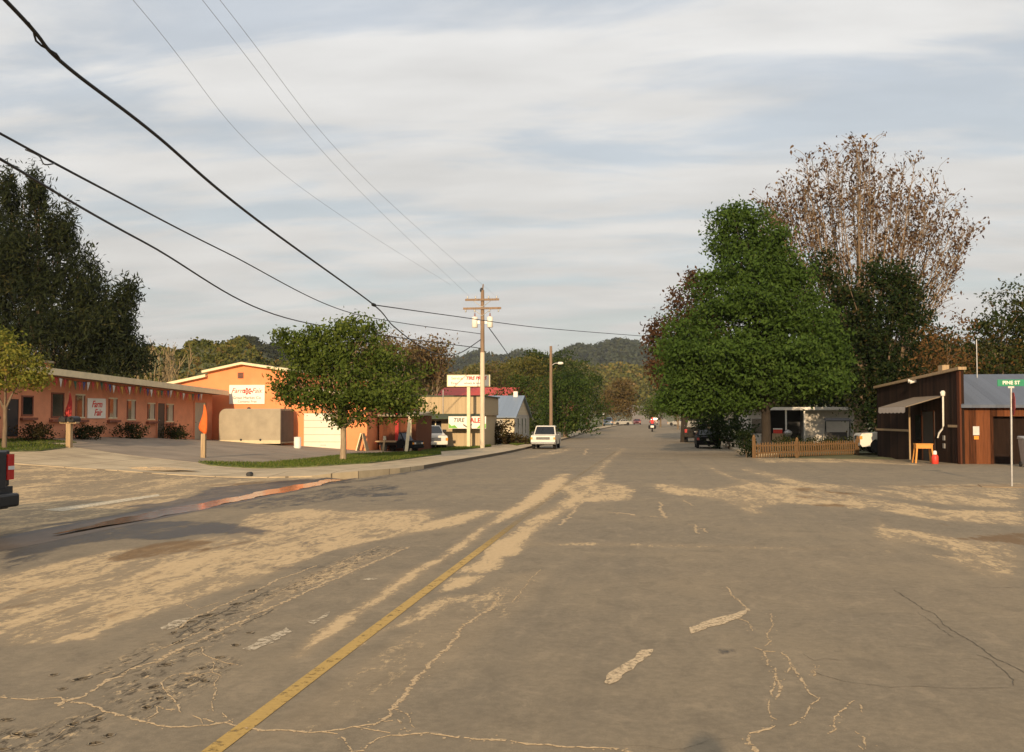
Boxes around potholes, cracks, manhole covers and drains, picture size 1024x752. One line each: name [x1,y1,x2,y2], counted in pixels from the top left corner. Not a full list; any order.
crack [2,587,1006,752]
